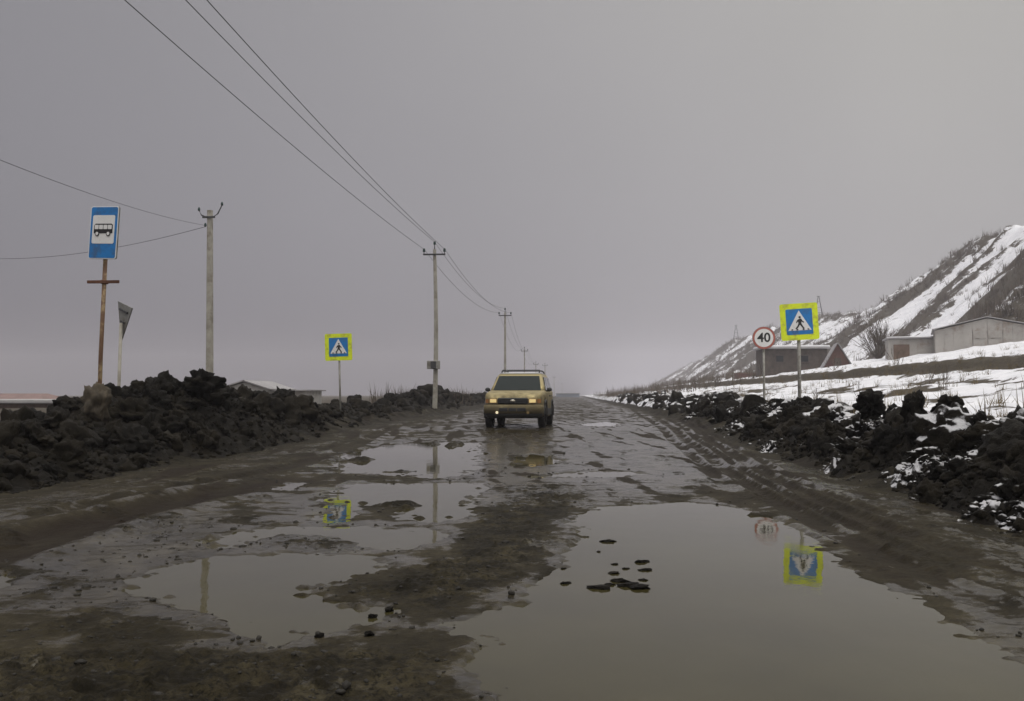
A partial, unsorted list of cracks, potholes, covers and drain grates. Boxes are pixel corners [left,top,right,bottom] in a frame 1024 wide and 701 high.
pothole [301,478,509,524]
pothole [92,546,406,649]
pothole [312,440,507,479]
pothole [396,500,1024,701]
